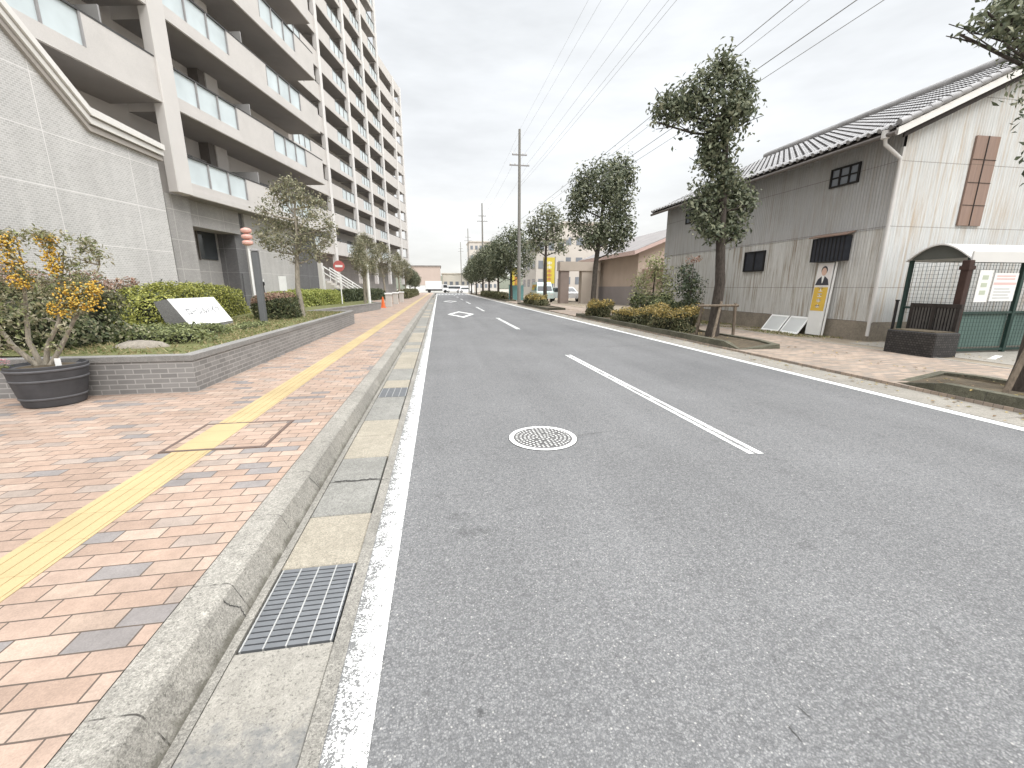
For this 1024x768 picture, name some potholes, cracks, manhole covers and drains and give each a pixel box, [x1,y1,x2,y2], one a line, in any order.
drain grate [378,387,408,398]
utility cover [158,420,294,453]
drain grate [238,563,356,654]
manhole cover [508,426,577,451]
